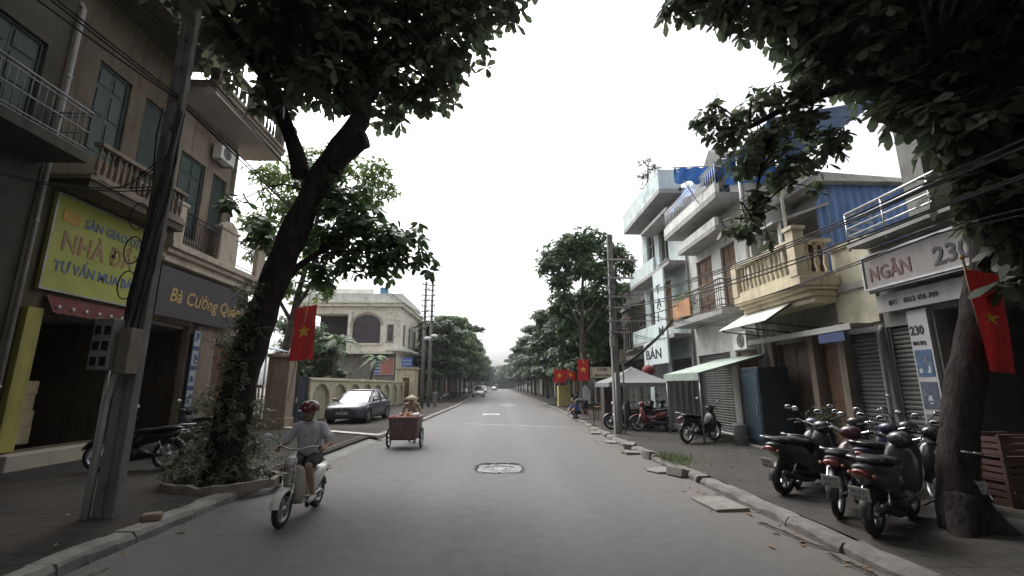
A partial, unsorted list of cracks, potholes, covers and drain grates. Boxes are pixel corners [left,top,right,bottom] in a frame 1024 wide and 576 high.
manhole cover [473,462,525,474]
